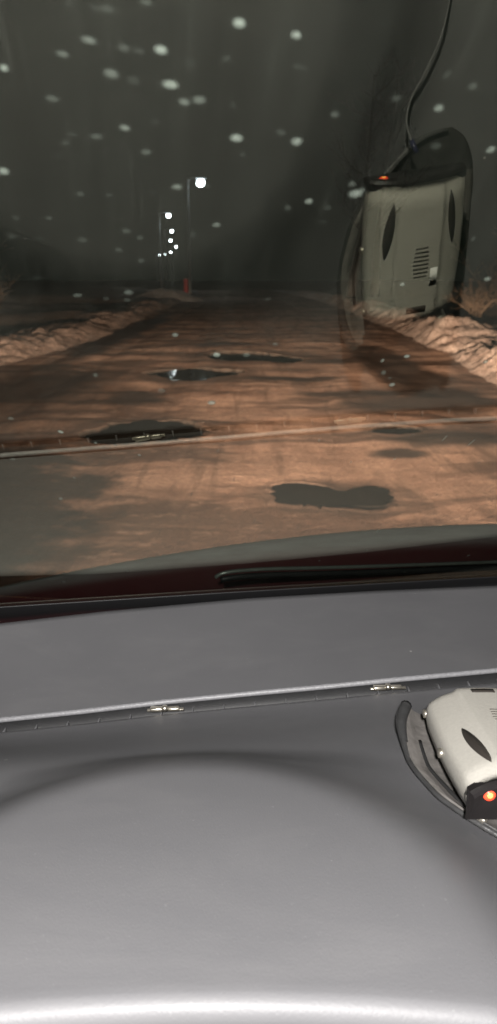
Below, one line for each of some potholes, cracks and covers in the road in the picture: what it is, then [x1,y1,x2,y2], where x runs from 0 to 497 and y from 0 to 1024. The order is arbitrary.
pothole [364,423,429,436]
pothole [197,350,317,364]
pothole [261,480,406,513]
pothole [135,367,253,382]
pothole [68,418,219,447]
